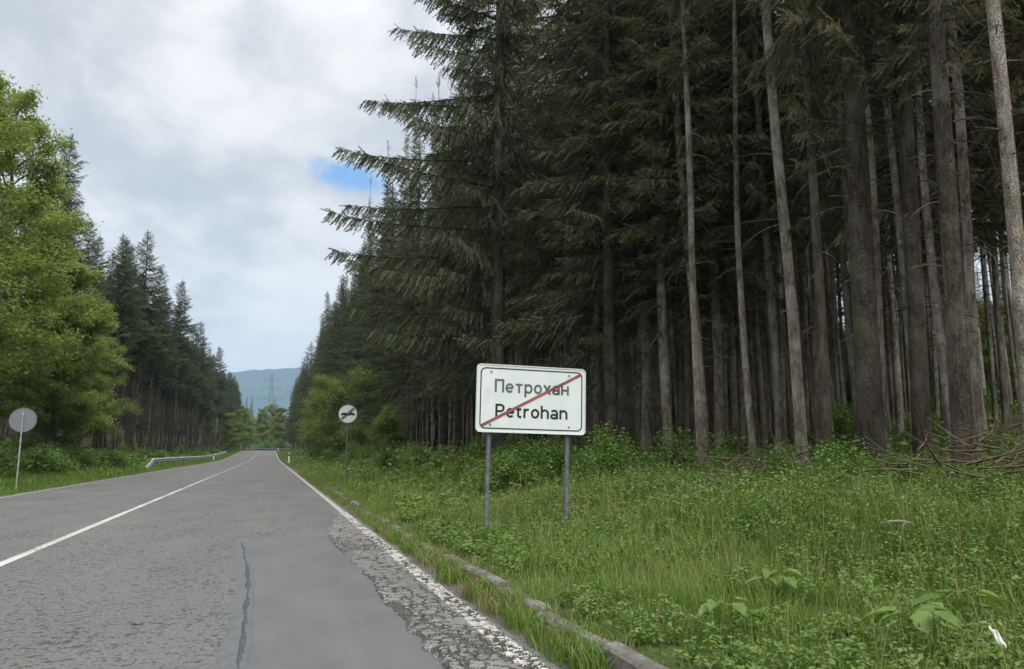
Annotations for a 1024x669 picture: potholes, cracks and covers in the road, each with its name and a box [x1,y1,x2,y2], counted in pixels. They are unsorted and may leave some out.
crack [328,515,551,669]
